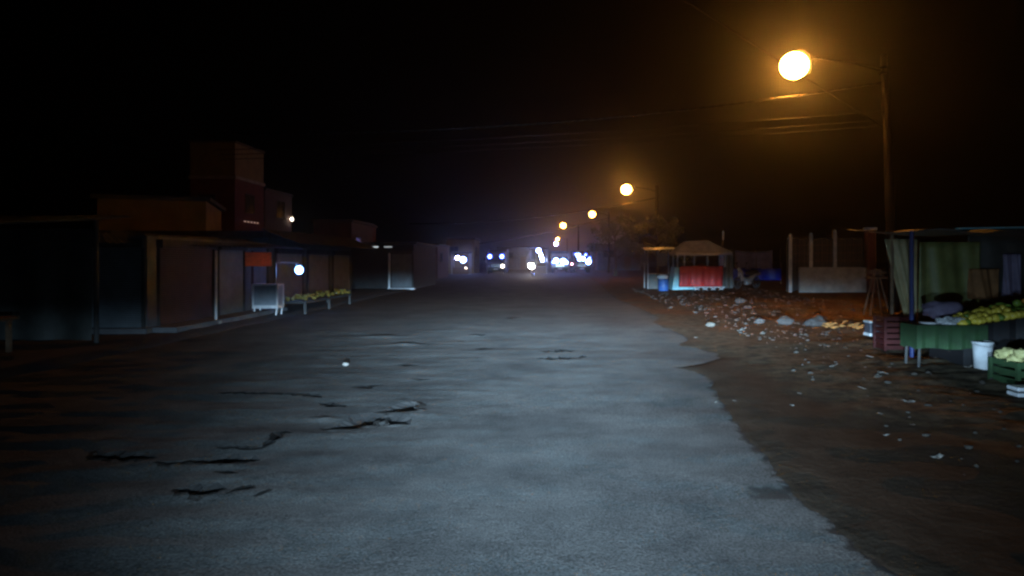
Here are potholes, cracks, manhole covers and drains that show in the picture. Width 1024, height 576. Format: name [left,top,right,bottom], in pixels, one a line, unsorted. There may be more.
crack [218,385,383,408]
crack [536,349,588,360]
crack [217,430,293,450]
pothole [321,412,413,432]
